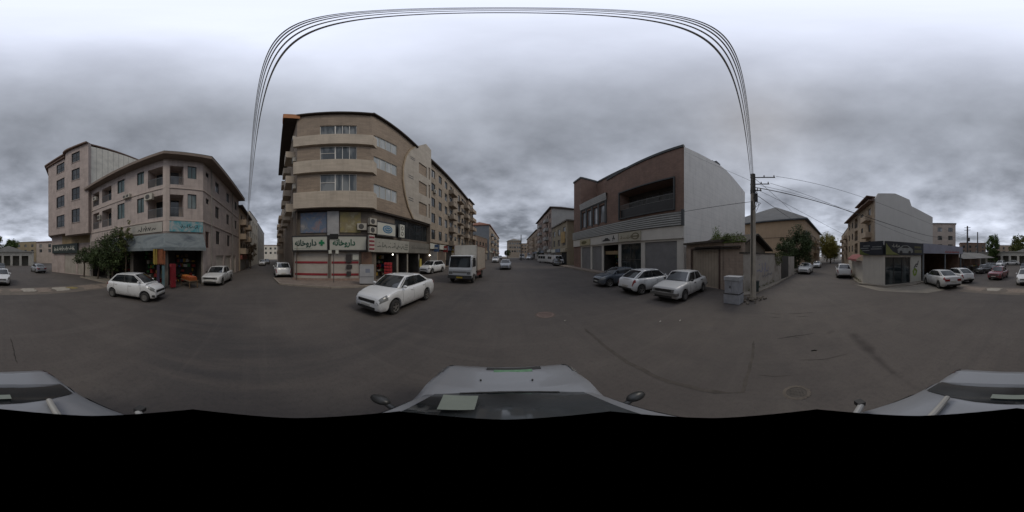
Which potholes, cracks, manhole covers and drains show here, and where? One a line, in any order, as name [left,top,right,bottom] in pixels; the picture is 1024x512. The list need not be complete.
manhole cover [782,385,811,400]
